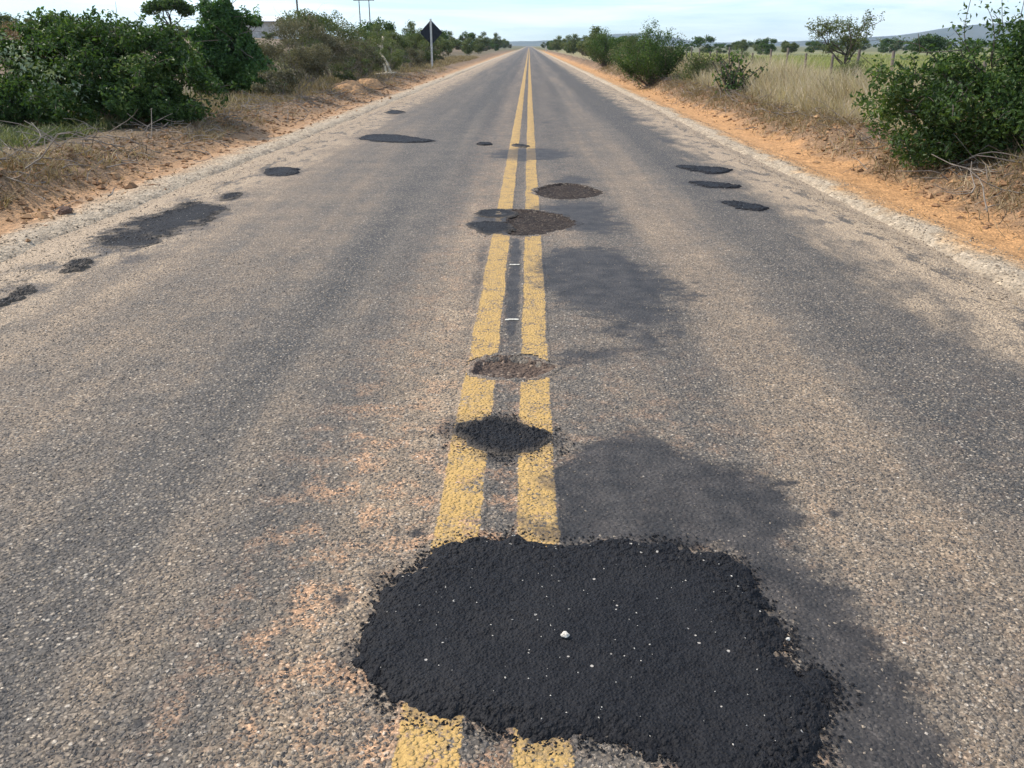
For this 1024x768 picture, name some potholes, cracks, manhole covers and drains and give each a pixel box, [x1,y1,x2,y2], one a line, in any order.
pothole [465,352,566,383]
pothole [500,208,584,237]
pothole [531,182,608,201]
